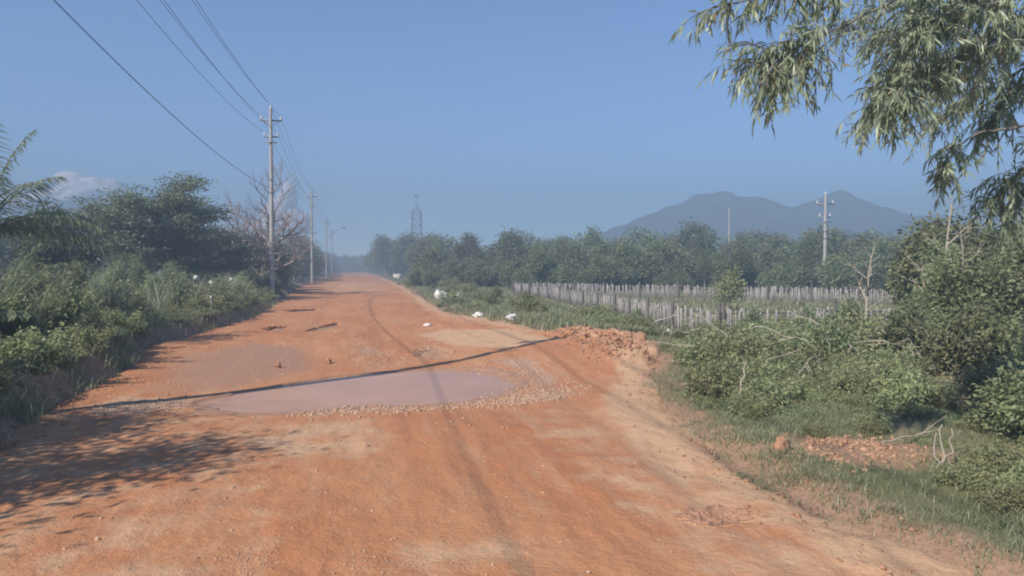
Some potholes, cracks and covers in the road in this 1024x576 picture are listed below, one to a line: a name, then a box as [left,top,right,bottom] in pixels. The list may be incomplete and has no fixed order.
pothole [182,366,531,416]
